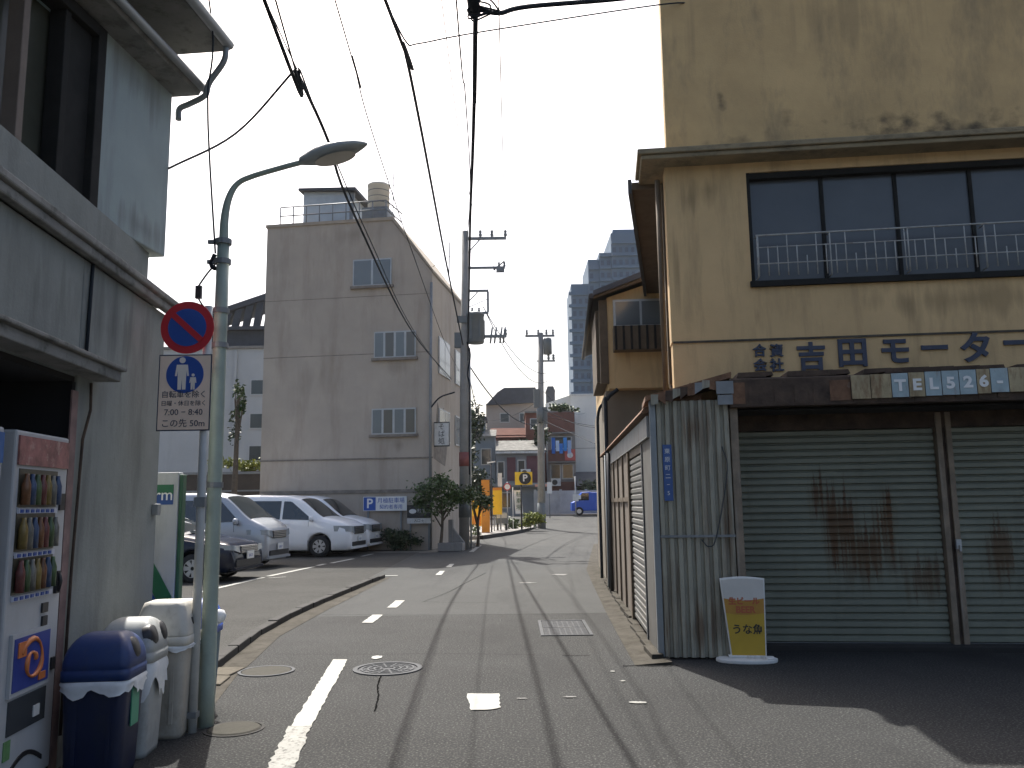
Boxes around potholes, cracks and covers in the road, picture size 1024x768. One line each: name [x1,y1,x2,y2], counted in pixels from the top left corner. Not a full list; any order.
crack [374,676,382,711]
manhole cover [202,721,265,737]
manhole cover [237,665,295,677]
manhole cover [353,661,422,676]
